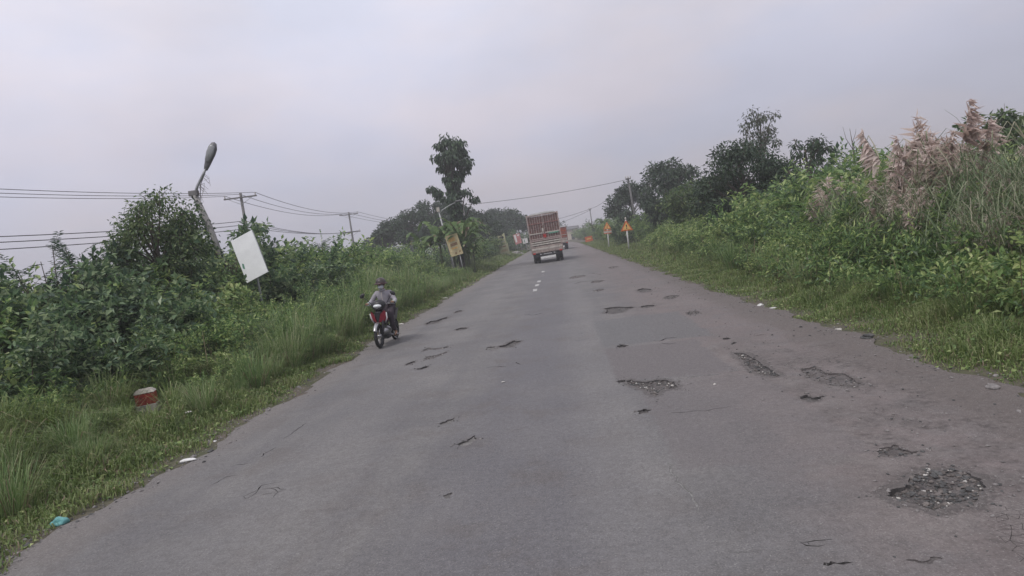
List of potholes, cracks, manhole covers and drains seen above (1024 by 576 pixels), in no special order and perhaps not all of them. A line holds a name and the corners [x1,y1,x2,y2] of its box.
pothole [887,468,987,511]
pothole [734,353,780,377]
pothole [627,380,677,395]
pothole [876,444,920,457]
pothole [800,367,861,388]
crack [668,463,699,513]
crack [214,425,303,499]
